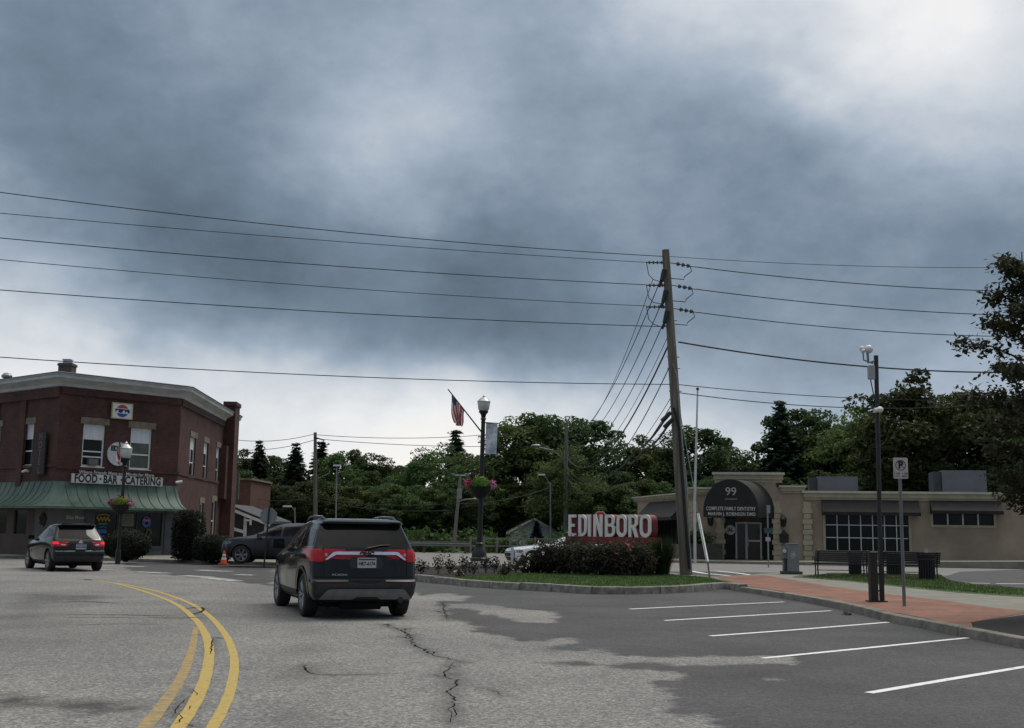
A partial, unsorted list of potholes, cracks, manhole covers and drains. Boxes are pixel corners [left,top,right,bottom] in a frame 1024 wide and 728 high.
crack [381,624,467,722]
